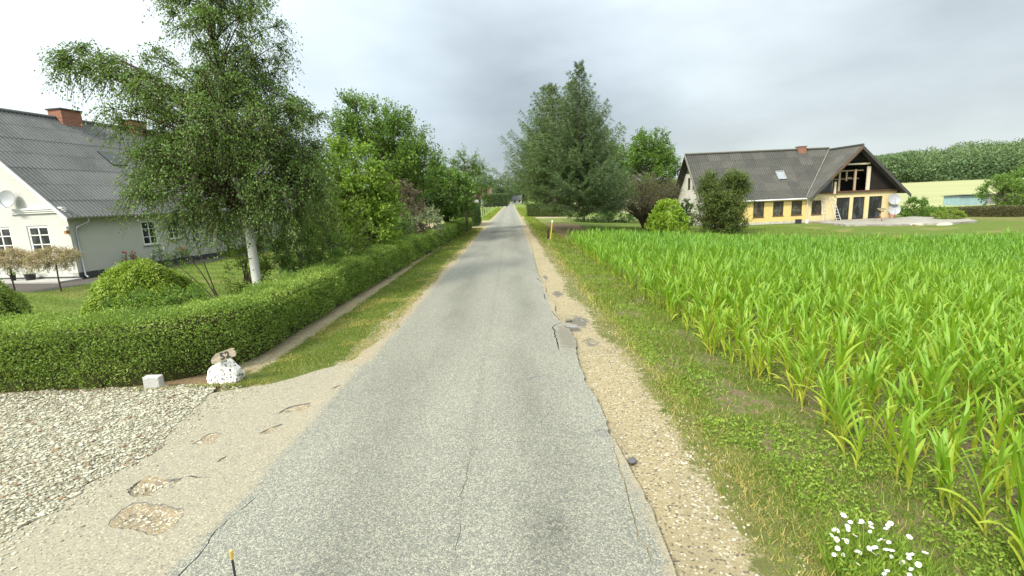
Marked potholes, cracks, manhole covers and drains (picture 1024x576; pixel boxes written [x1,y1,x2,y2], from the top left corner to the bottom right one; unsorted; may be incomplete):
crack [454,349,483,571]
crack [613,443,657,567]
pothole [108,502,185,537]
pothole [126,476,184,497]
pothole [279,403,310,414]
pothole [193,432,222,445]
